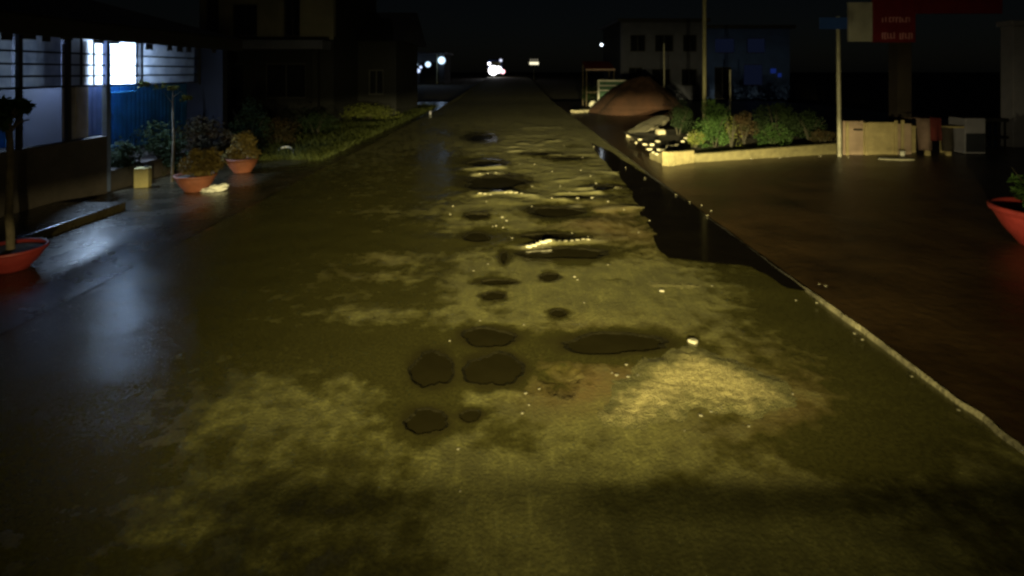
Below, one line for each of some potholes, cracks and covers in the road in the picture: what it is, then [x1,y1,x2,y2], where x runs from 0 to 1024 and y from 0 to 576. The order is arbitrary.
pothole [527,206,588,218]
pothole [461,350,526,386]
pothole [560,331,670,355]
pothole [482,291,505,300]
pothole [407,350,455,388]
pothole [460,326,518,347]
pothole [549,309,567,317]
pothole [462,232,491,242]
pothole [464,174,532,190]
pothole [464,212,490,220]
pothole [539,273,559,281]
pothole [459,409,481,423]
